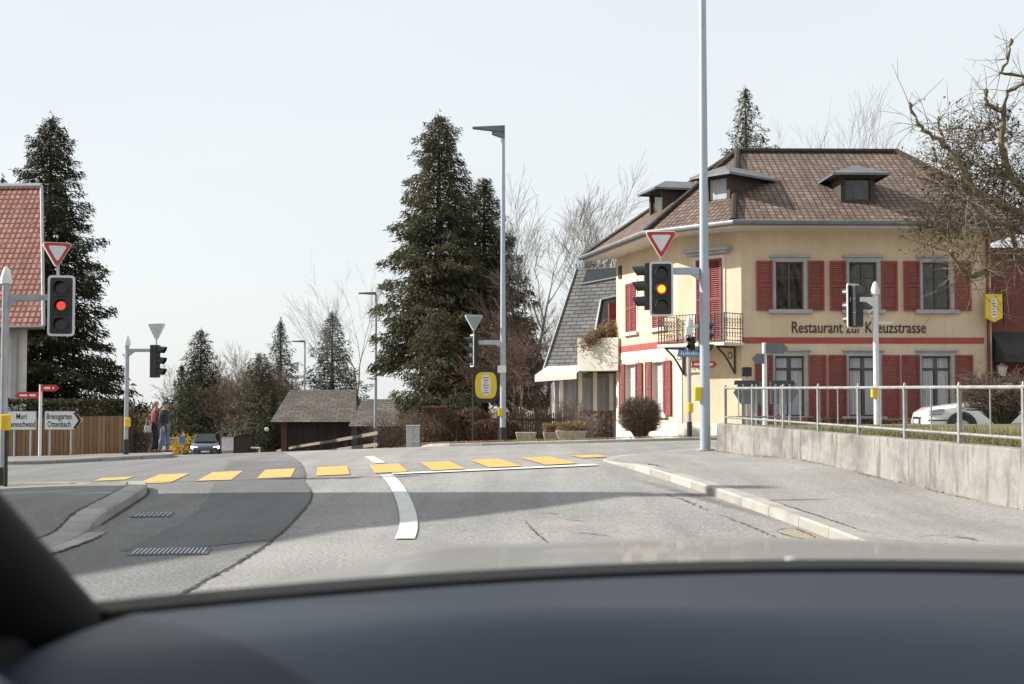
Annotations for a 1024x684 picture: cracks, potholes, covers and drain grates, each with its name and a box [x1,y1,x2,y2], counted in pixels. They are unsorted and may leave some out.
drain grate [127,547,211,556]
